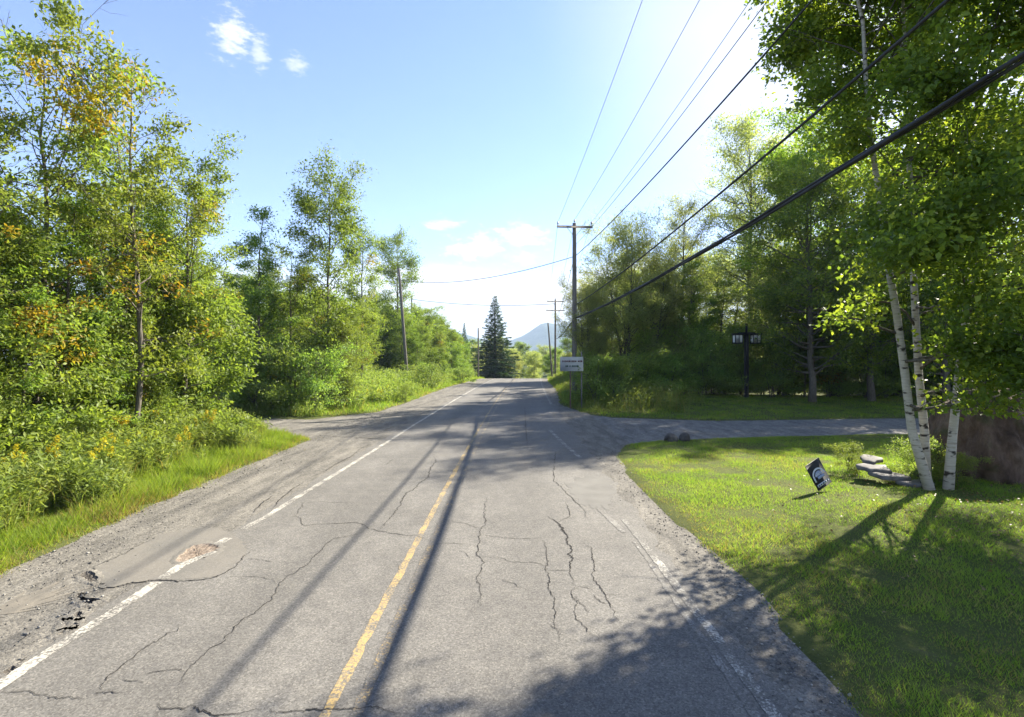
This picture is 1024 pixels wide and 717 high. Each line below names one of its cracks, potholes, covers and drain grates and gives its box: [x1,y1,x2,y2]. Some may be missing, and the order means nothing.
pothole [169,541,227,564]
crack [152,699,399,716]
pothole [73,569,105,586]
pothole [51,617,88,633]
pothole [68,591,112,608]
crack [3,455,619,699]
pothole [59,607,94,626]
